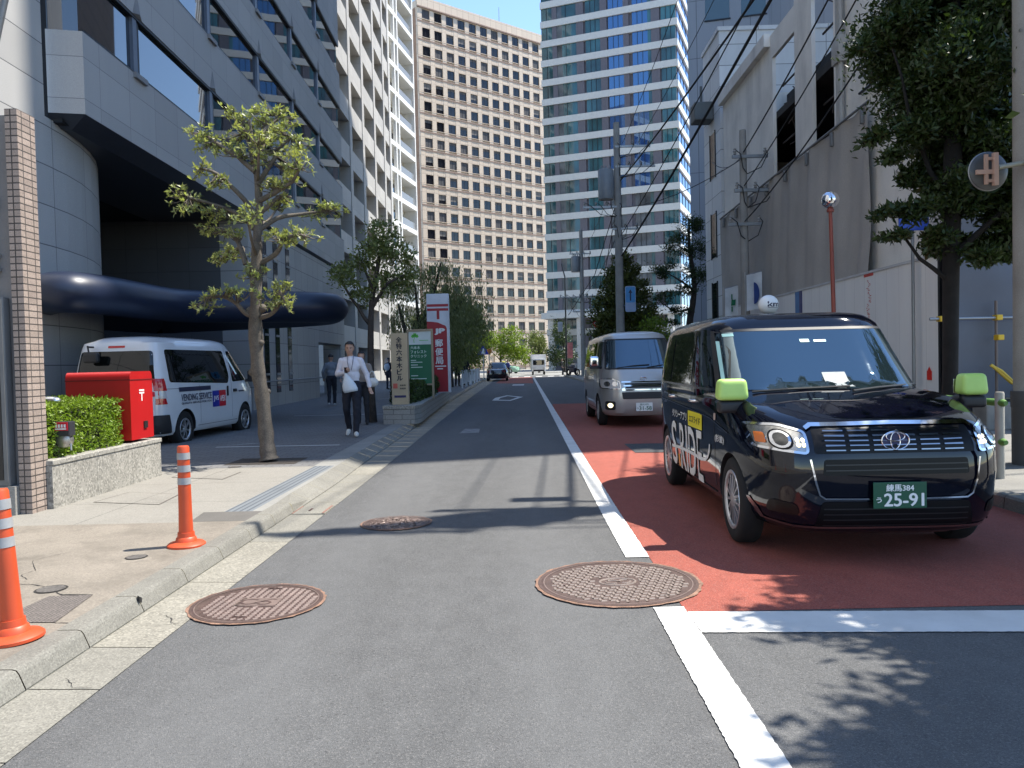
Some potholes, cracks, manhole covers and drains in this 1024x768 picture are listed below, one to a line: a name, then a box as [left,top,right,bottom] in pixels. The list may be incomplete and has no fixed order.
manhole cover [33,585,69,593]
manhole cover [360,516,432,530]
manhole cover [185,583,327,625]
crack [21,557,93,623]
utility cover [23,595,91,622]
manhole cover [535,561,704,608]
